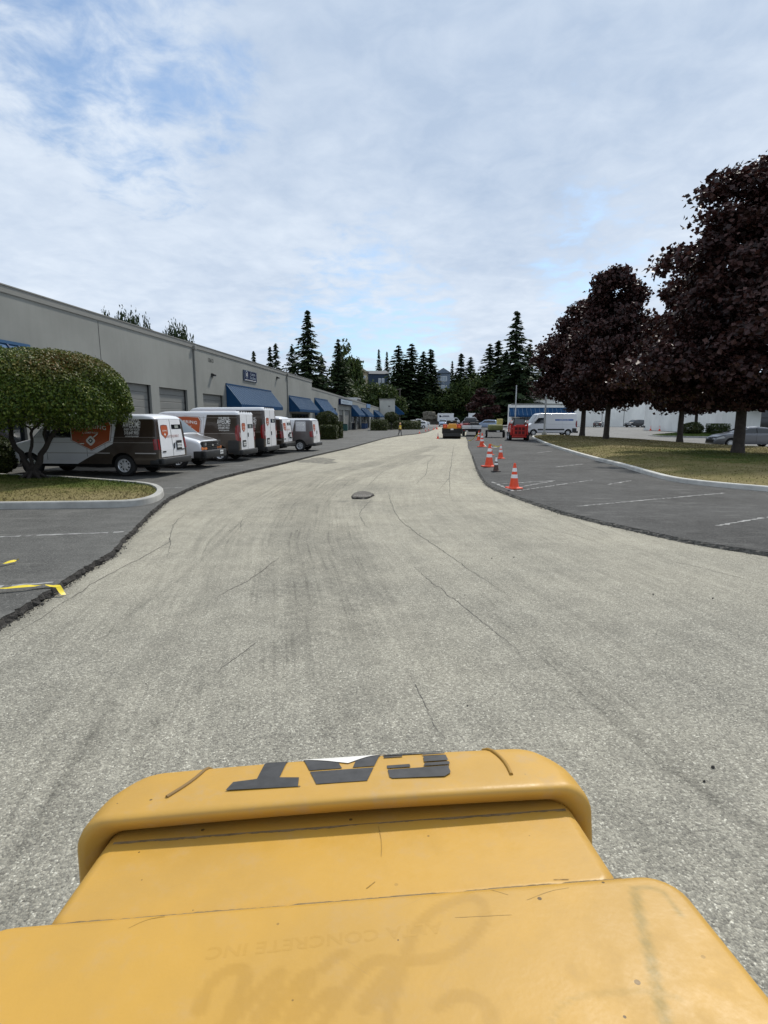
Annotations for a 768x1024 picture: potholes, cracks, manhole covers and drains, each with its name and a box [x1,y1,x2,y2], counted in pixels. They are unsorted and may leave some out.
manhole cover [351,491,375,499]
